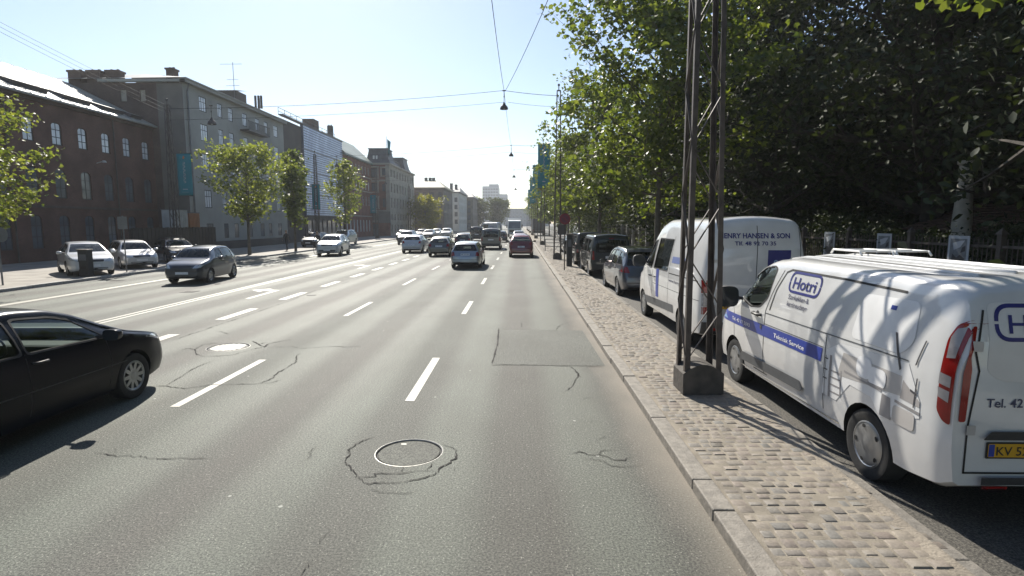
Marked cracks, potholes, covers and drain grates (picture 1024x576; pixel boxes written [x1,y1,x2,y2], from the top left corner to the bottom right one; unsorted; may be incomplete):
crack [345,437,457,493]
crack [568,420,628,467]
crack [159,340,353,389]
manhole cover [206,343,250,352]
manhole cover [374,439,443,467]
